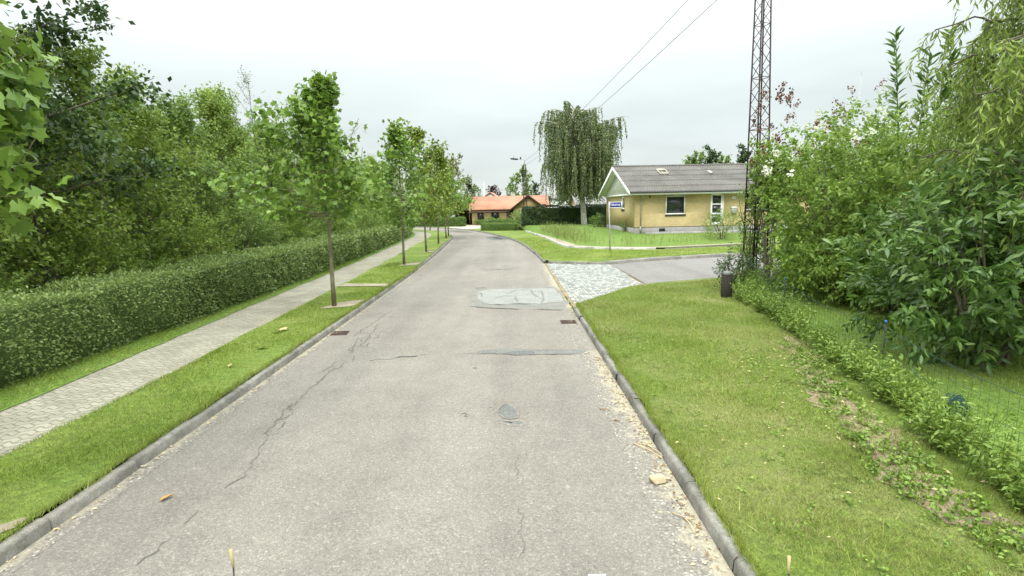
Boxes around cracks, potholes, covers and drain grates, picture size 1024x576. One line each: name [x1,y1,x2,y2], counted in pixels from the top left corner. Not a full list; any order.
crack [224,311,396,488]
